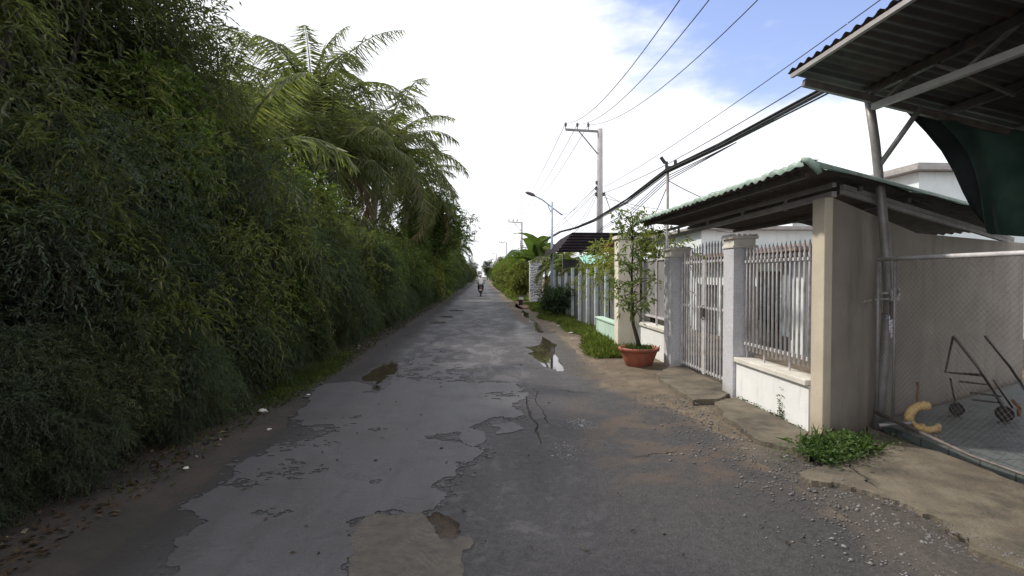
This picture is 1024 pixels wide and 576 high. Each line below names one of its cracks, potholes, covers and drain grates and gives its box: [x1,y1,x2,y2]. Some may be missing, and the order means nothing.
crack [526,390,593,445]
pothole [361,360,398,390]
pothole [526,336,564,371]
crack [849,465,877,488]
pothole [427,512,461,539]
